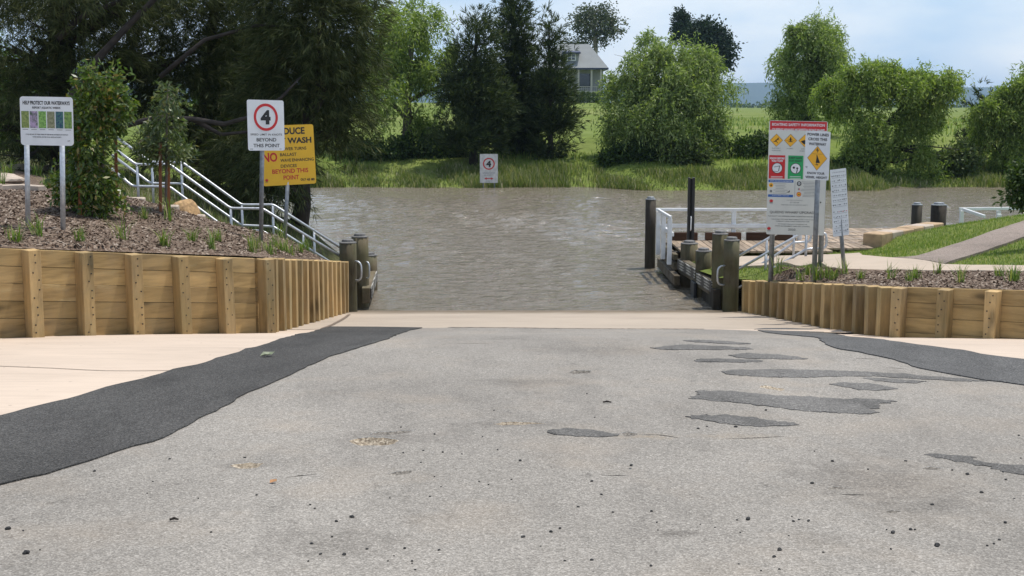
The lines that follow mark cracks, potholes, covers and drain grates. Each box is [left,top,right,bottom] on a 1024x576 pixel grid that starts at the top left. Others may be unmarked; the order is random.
pothole [349,437,399,446]
